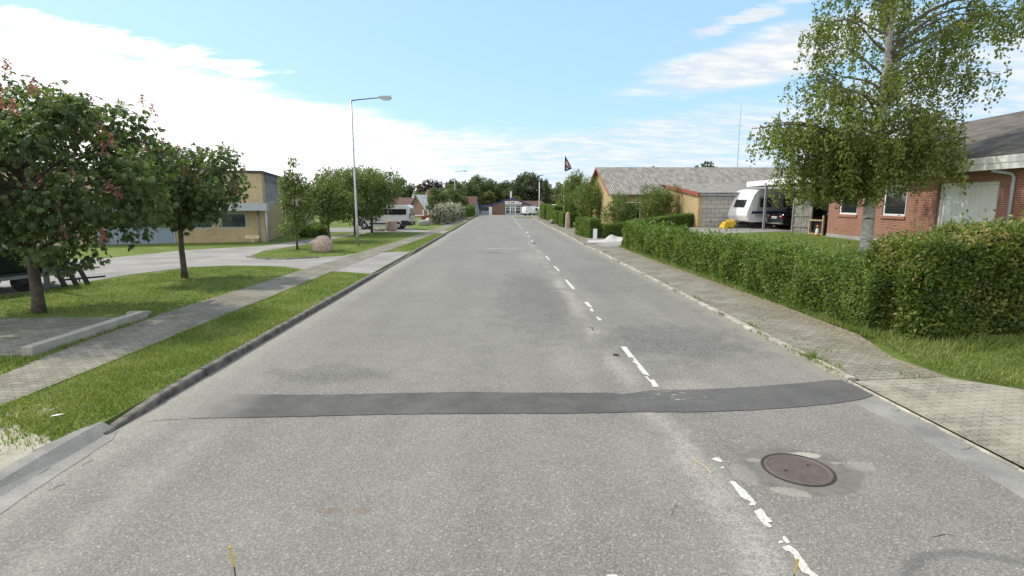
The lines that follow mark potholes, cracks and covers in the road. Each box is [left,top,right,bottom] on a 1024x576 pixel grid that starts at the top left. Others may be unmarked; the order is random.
manhole cover [761,453,837,487]
